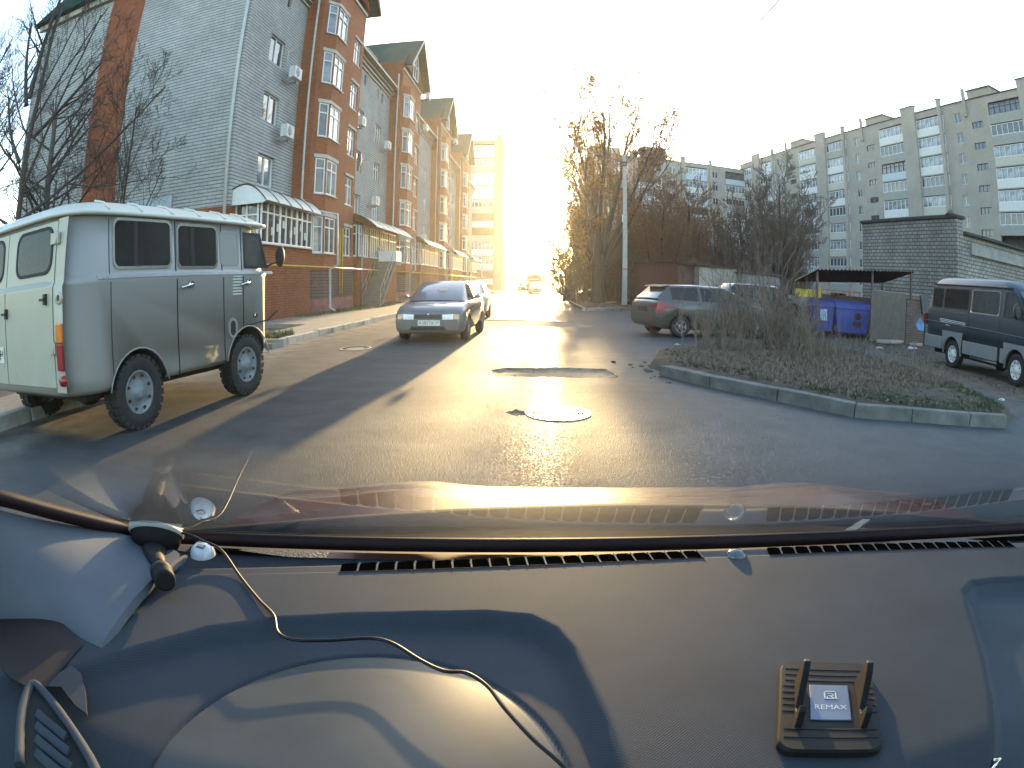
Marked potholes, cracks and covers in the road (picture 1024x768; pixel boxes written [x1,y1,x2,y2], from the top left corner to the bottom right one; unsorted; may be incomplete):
manhole cover [525,405,591,422]
